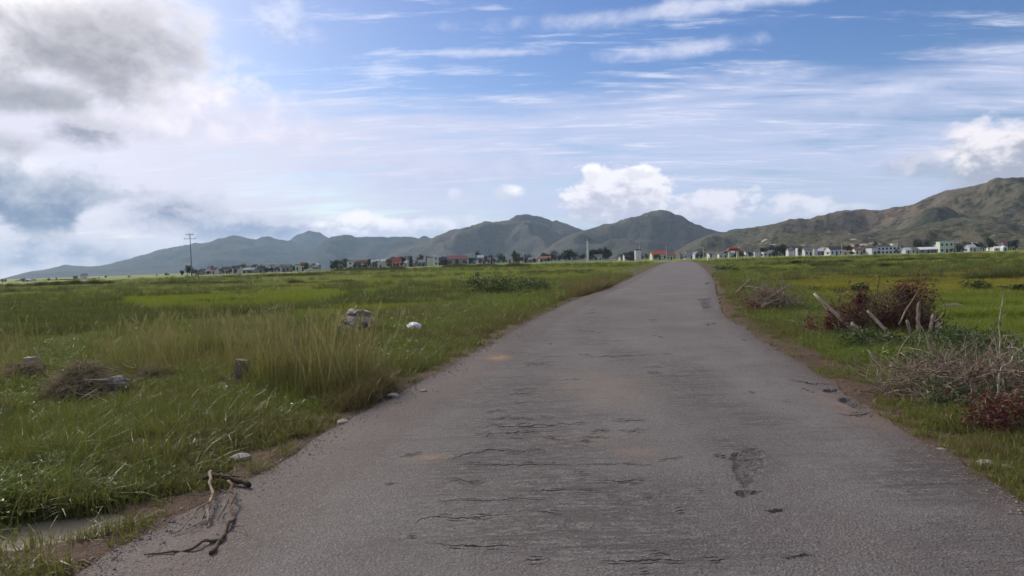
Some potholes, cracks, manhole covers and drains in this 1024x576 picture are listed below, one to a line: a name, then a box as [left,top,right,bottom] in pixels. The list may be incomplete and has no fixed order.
crack [437,543,544,564]
pothole [728,448,767,489]
pothole [733,490,762,498]
pothole [837,397,869,410]
crack [407,388,682,539]
crack [601,550,684,575]
